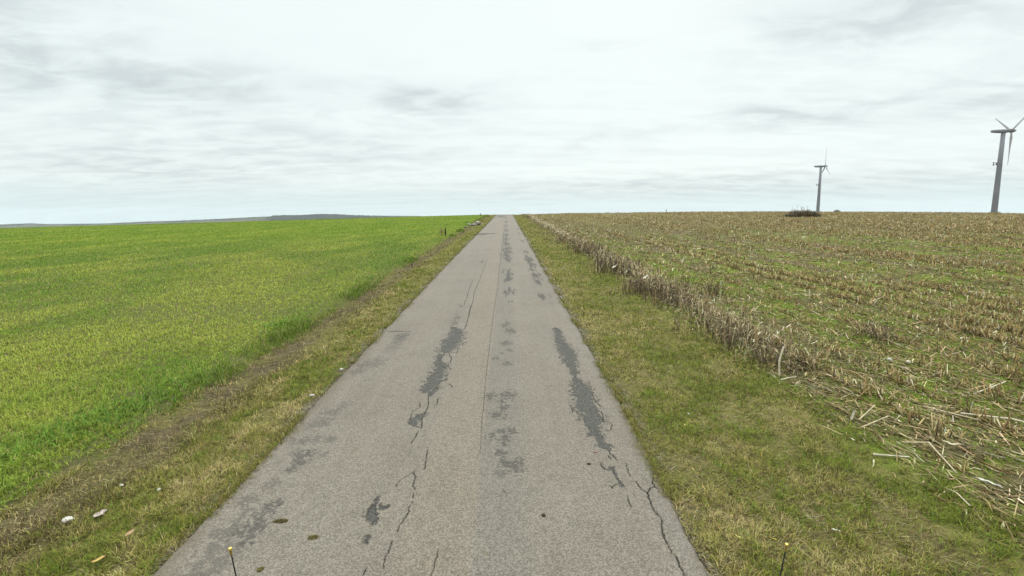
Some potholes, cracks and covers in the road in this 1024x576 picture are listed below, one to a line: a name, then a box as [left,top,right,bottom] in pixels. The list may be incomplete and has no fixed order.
crack [363,260,487,576]
crack [554,328,684,576]
